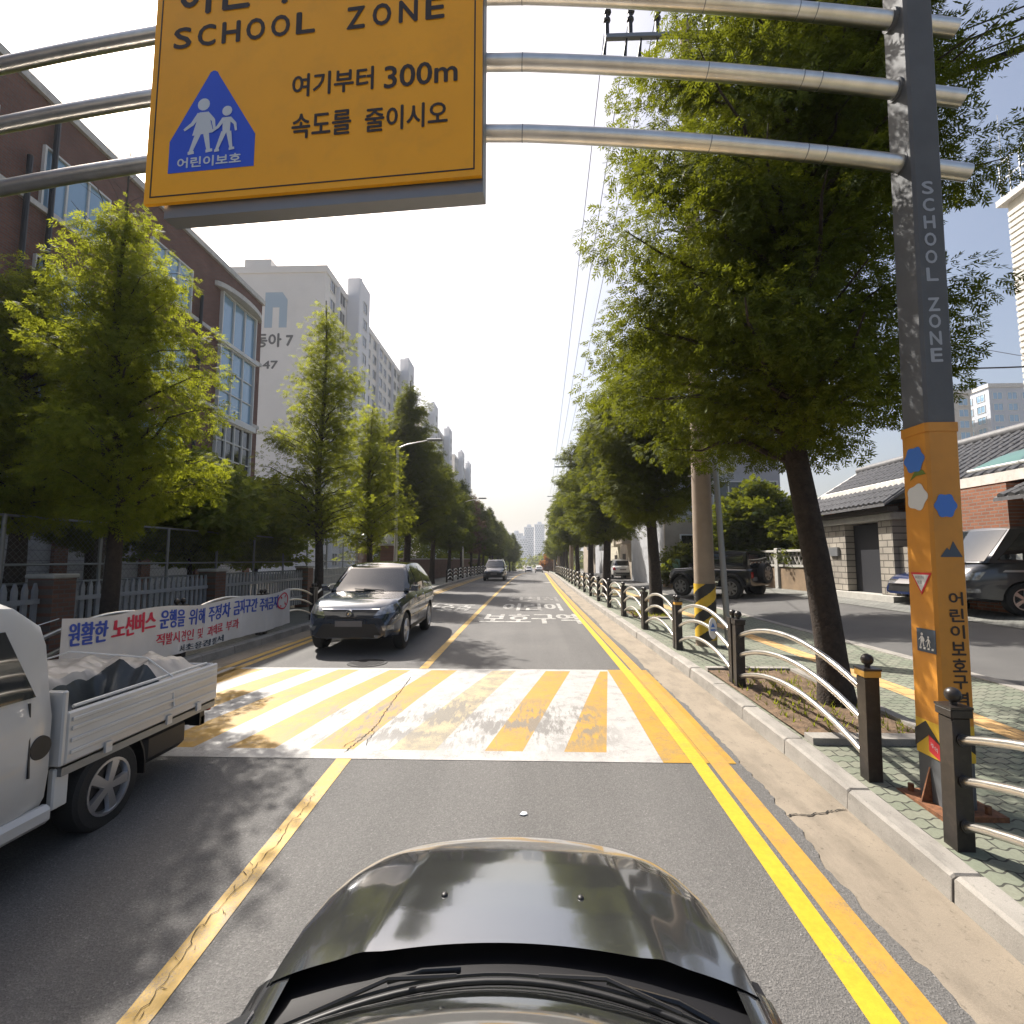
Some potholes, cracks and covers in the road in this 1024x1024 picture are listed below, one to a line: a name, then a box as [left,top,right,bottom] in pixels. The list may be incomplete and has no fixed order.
manhole cover [347,659,388,667]
crack [134,794,315,1020]
crack [344,677,411,751]
